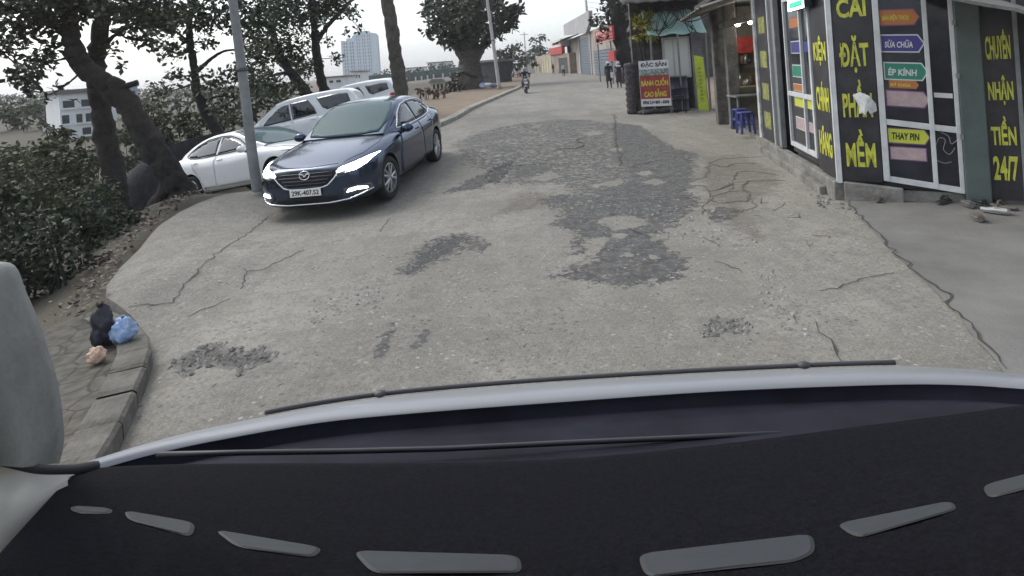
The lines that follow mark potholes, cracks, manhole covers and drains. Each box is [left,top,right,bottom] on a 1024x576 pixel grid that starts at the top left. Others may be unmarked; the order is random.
crack [685,156,831,247]
crack [131,217,303,316]
pothole [166,341,280,378]
crack [819,201,1006,368]
crack [611,114,653,166]
crack [792,313,841,360]
pothole [700,315,753,337]
